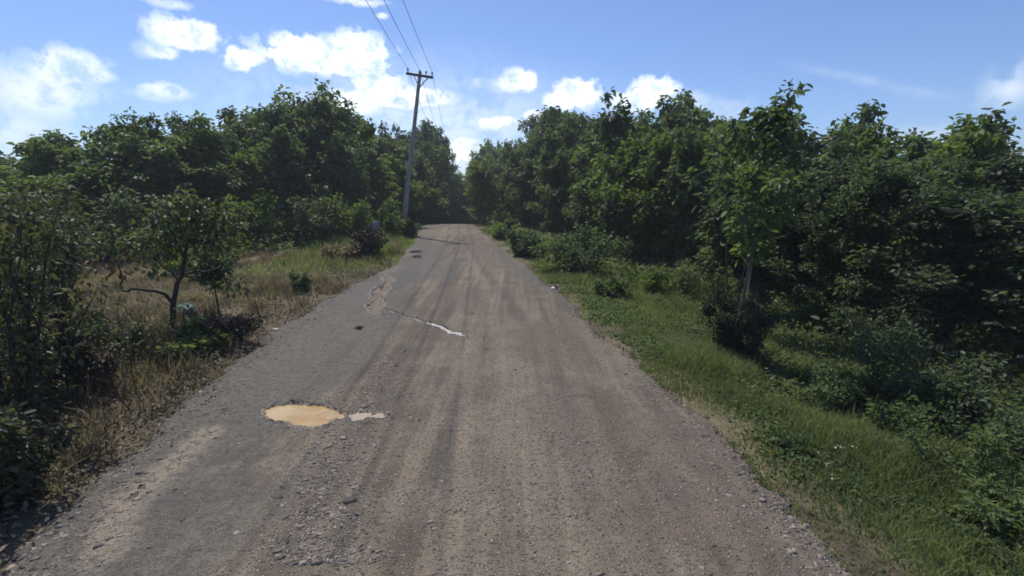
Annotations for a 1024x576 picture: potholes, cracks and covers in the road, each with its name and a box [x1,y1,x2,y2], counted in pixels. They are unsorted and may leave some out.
pothole [364,272,396,315]
pothole [345,410,389,421]
pothole [260,401,348,430]
crack [375,307,489,351]
